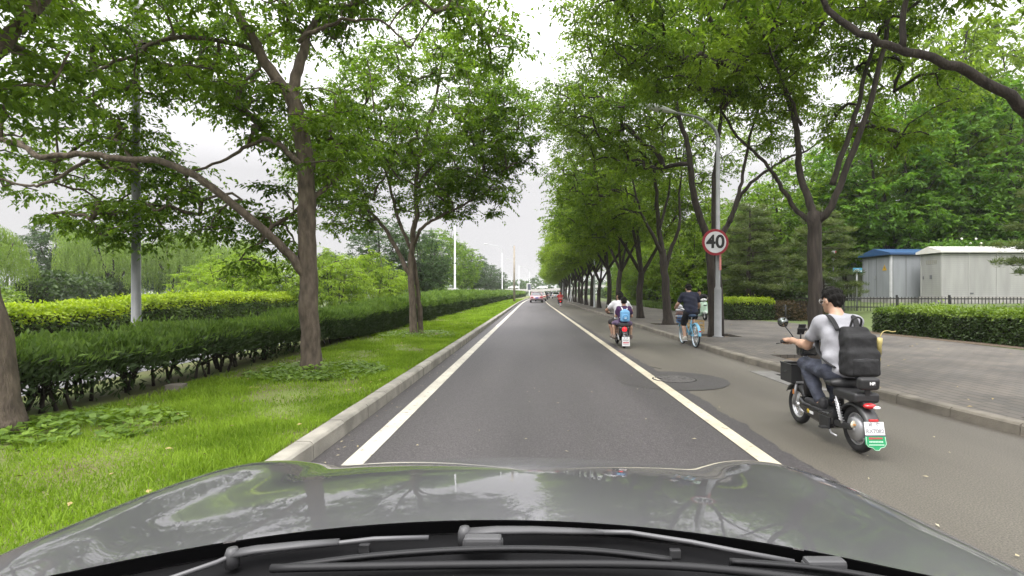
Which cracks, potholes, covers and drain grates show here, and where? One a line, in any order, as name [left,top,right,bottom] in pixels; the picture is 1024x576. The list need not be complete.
manhole cover [652,375,697,383]
